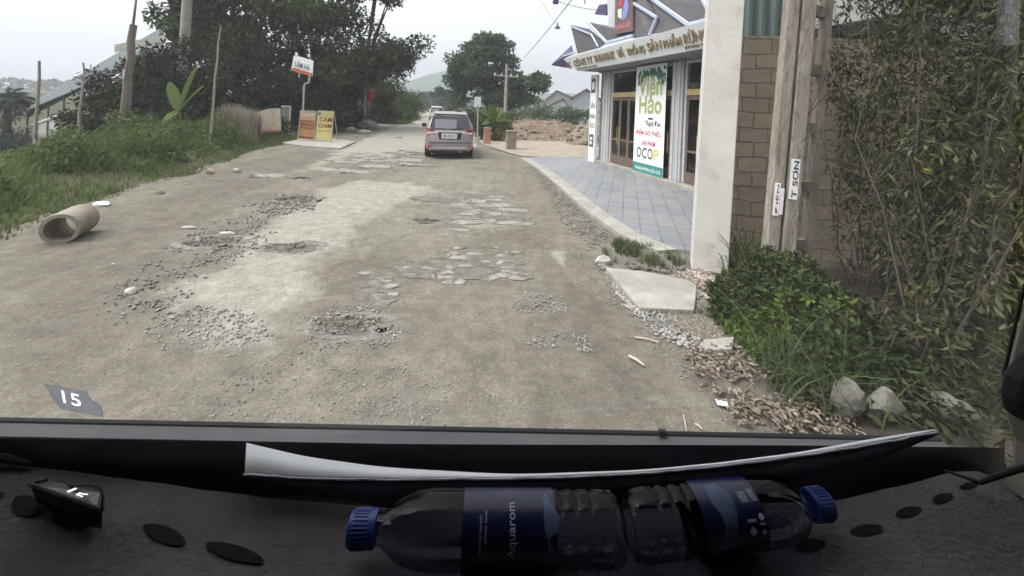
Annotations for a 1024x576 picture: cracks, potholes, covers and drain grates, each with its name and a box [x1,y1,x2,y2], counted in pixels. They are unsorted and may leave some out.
pothole [170,235,252,250]
pothole [294,312,403,341]
crack [352,193,537,310]
pothole [269,195,327,206]
pothole [252,240,330,256]
